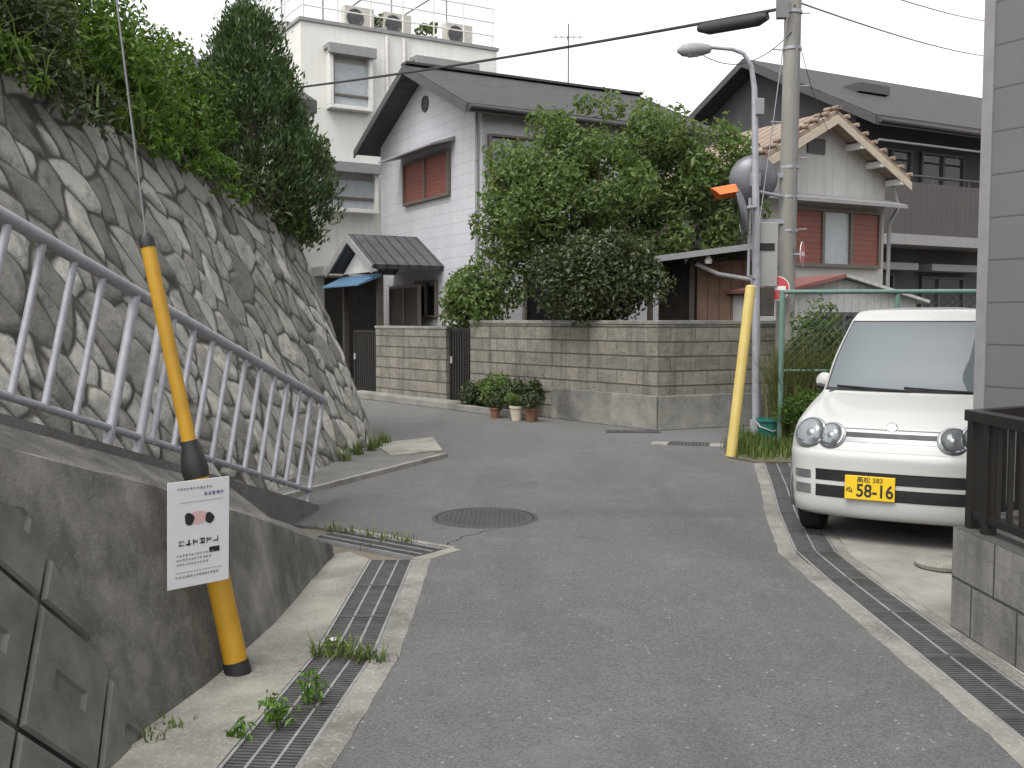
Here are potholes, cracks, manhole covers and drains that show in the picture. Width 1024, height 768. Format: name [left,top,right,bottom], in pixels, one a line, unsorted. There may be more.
drain grate [316,616,390,656]
drain grate [361,539,444,560]
drain grate [778,511,823,530]
drain grate [920,655,1024,715]
drain grate [867,611,977,656]
drain grate [218,707,338,768]
drain grate [274,655,371,708]
drain grate [786,529,836,552]
drain grate [993,715,1024,740]
drain grate [767,473,793,484]
drain grate [826,578,916,612]
manhole cover [432,507,538,529]
